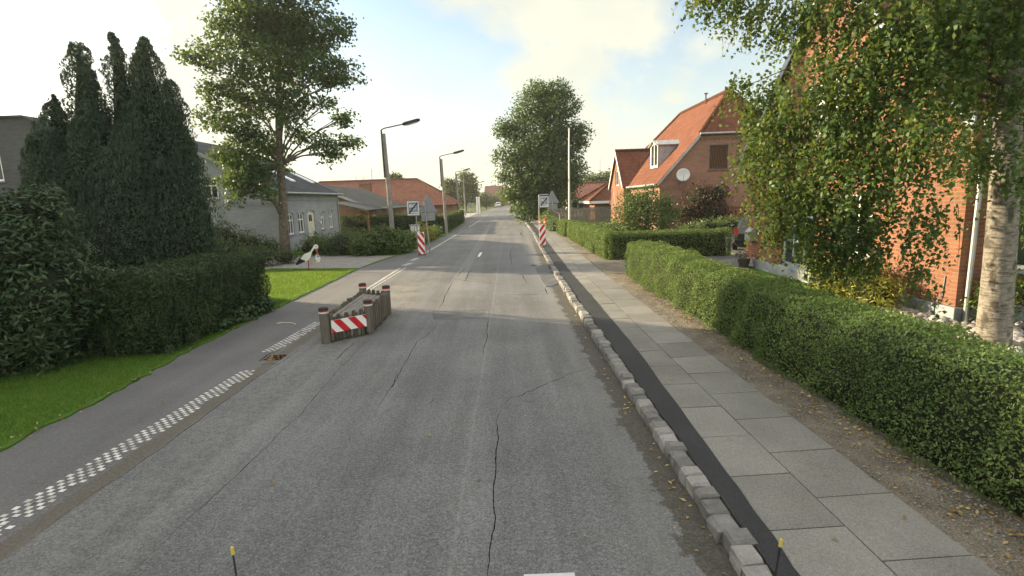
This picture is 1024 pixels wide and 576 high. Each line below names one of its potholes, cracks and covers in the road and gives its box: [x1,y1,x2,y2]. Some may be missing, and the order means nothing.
crack [487,367,591,576]
